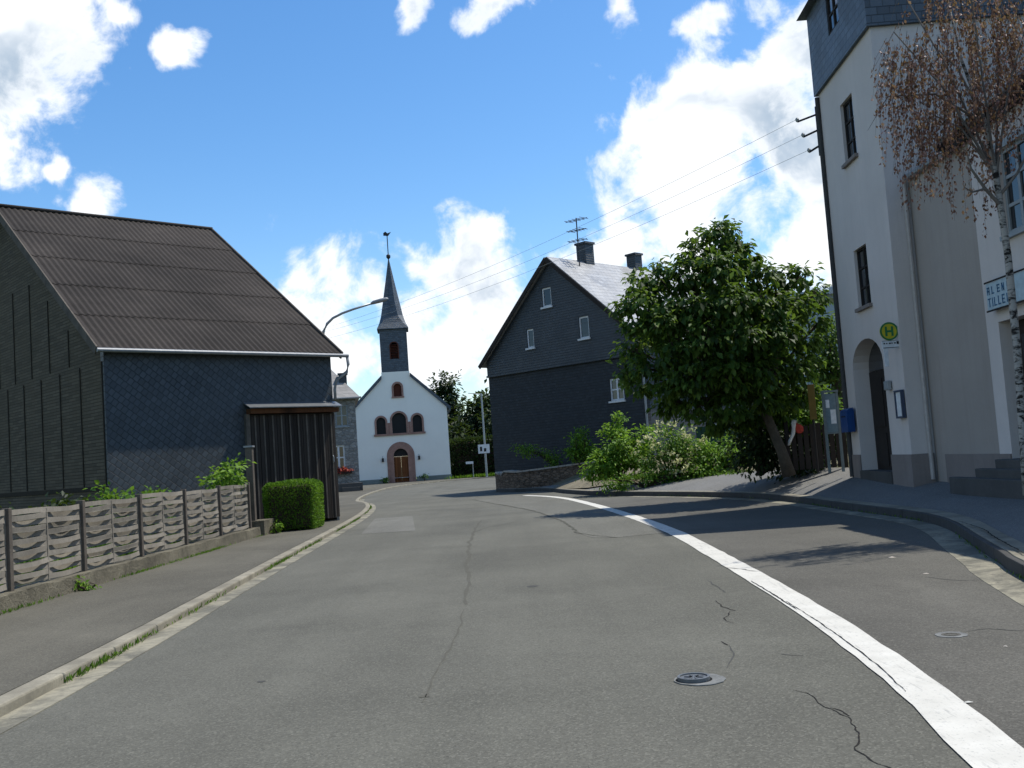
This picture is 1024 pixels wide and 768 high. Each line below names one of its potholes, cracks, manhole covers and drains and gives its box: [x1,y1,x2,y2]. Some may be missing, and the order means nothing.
manhole cover [674,672,726,686]
crack [796,690,891,768]
